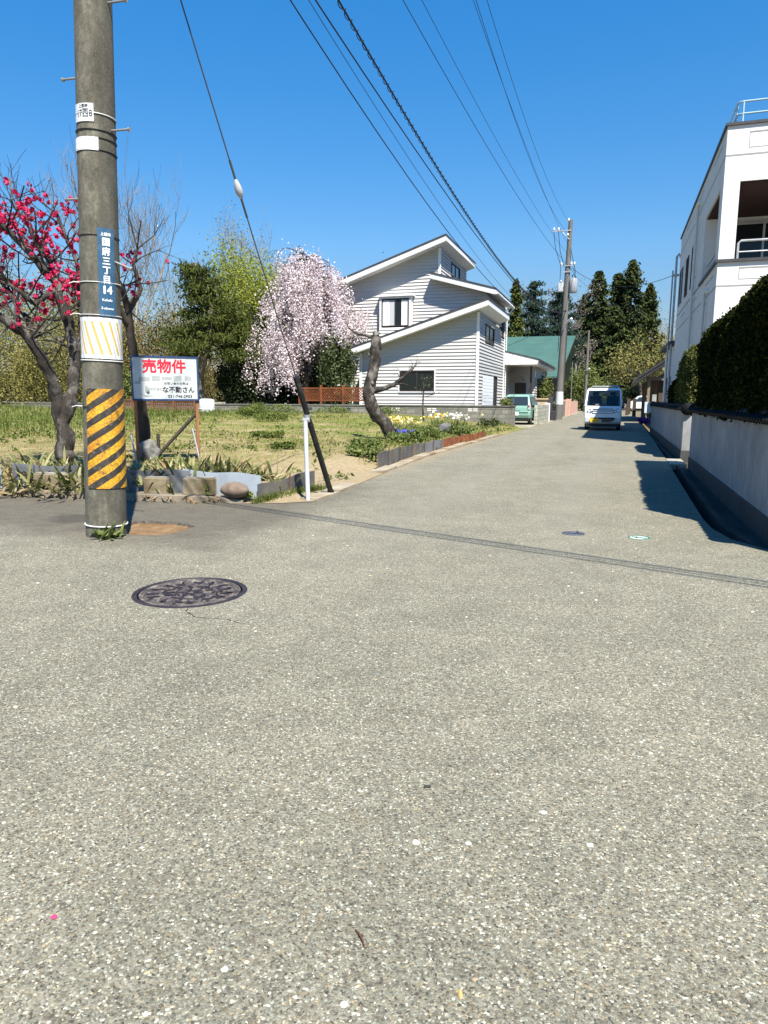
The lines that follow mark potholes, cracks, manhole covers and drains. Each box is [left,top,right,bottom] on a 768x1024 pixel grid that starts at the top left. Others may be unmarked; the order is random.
manhole cover [131,577,247,608]
